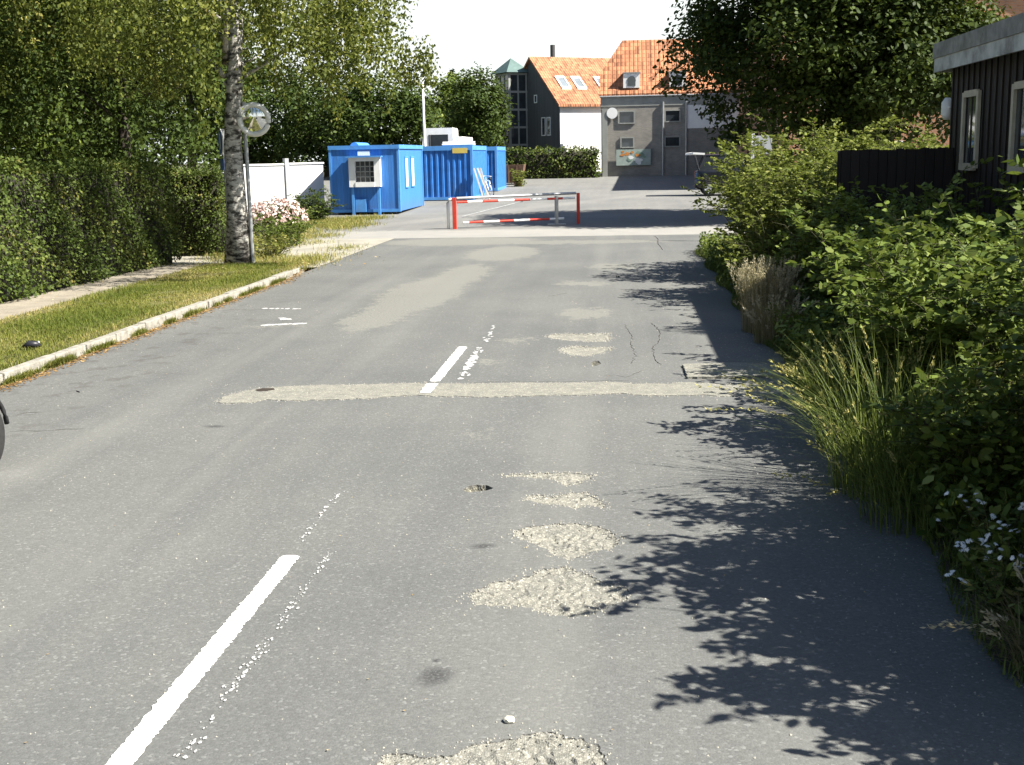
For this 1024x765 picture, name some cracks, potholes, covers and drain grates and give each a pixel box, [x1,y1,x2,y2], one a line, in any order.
crack [475,323,661,383]
